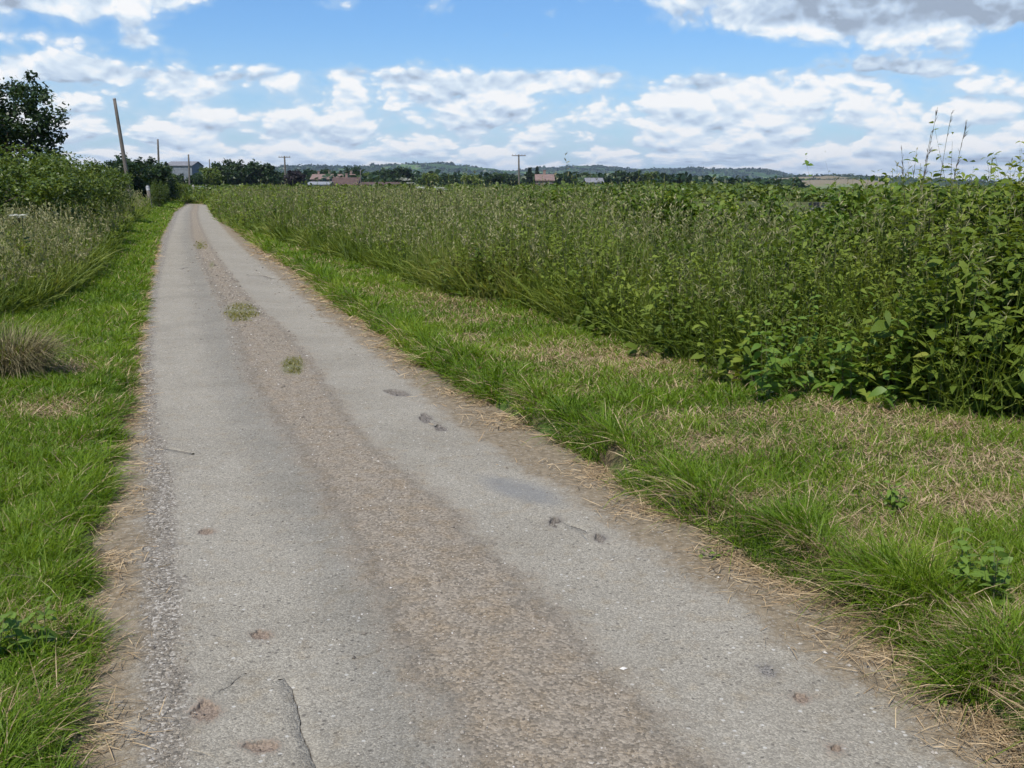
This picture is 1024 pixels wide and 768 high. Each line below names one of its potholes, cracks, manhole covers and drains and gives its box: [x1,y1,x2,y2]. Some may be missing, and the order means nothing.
pothole [372,387,421,399]
crack [206,671,336,768]
